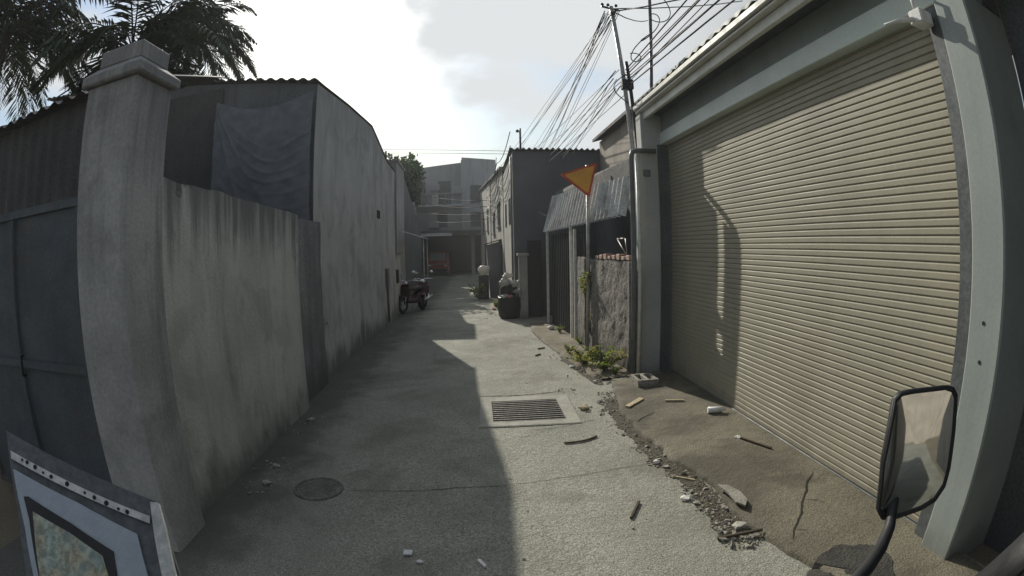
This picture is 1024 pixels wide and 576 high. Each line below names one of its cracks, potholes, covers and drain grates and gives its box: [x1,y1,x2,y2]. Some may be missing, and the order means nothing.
crack [793,473,825,537]
manhole cover [293,477,344,501]
drain grate [479,394,583,428]
